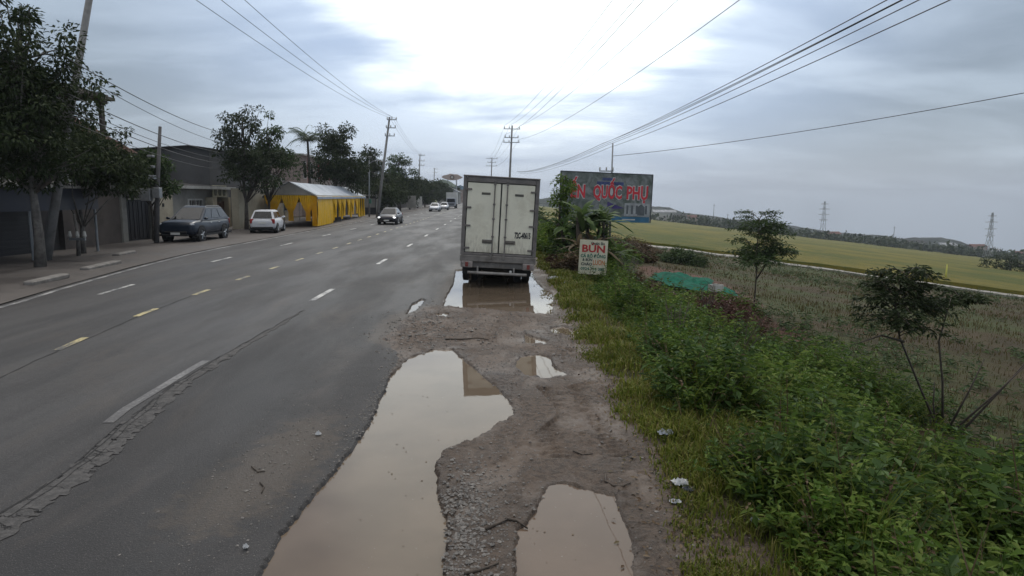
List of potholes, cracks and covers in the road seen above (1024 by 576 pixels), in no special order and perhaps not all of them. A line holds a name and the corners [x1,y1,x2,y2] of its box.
pothole [250,347,519,576]
pothole [403,297,429,315]
pothole [513,352,571,378]
pothole [441,269,557,314]
pothole [508,480,644,576]
